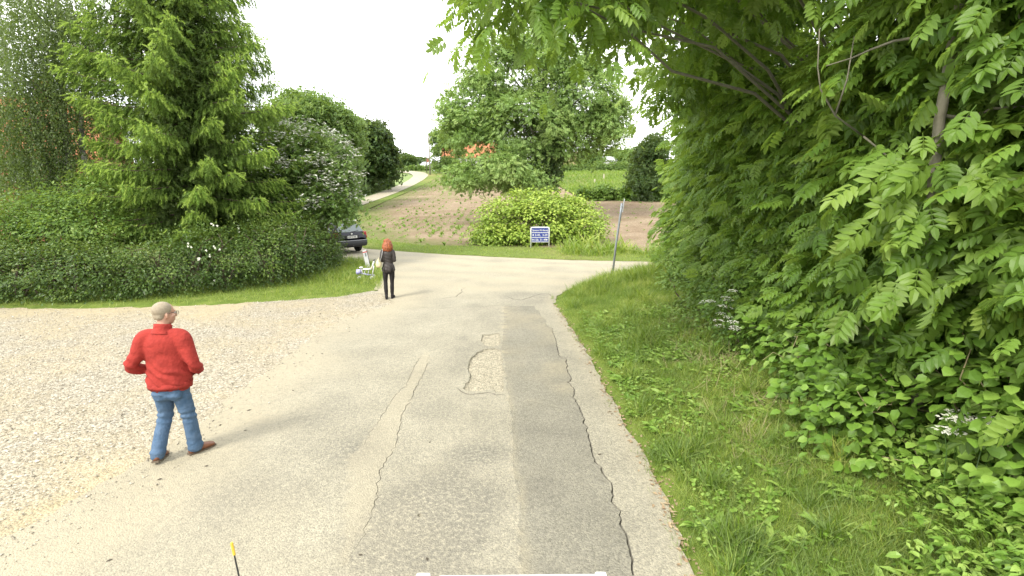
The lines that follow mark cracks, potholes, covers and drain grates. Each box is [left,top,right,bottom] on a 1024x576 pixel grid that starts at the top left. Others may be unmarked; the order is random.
pothole [463,348,505,392]
crack [343,355,430,566]
crack [403,289,634,576]
pothole [481,333,501,347]
